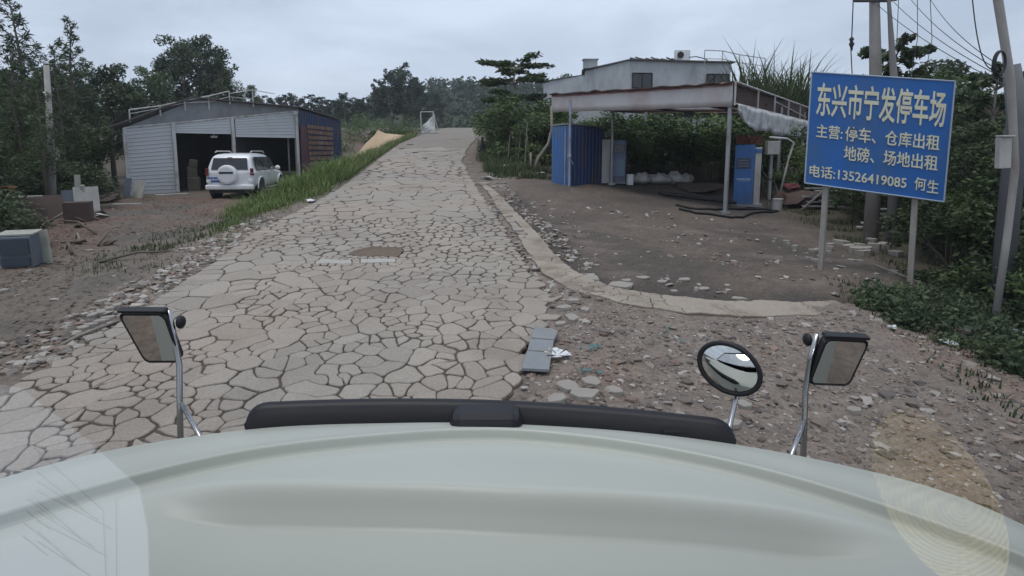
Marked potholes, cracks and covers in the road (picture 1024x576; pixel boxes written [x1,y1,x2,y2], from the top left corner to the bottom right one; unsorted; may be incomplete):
crack [289,152,767,318]
